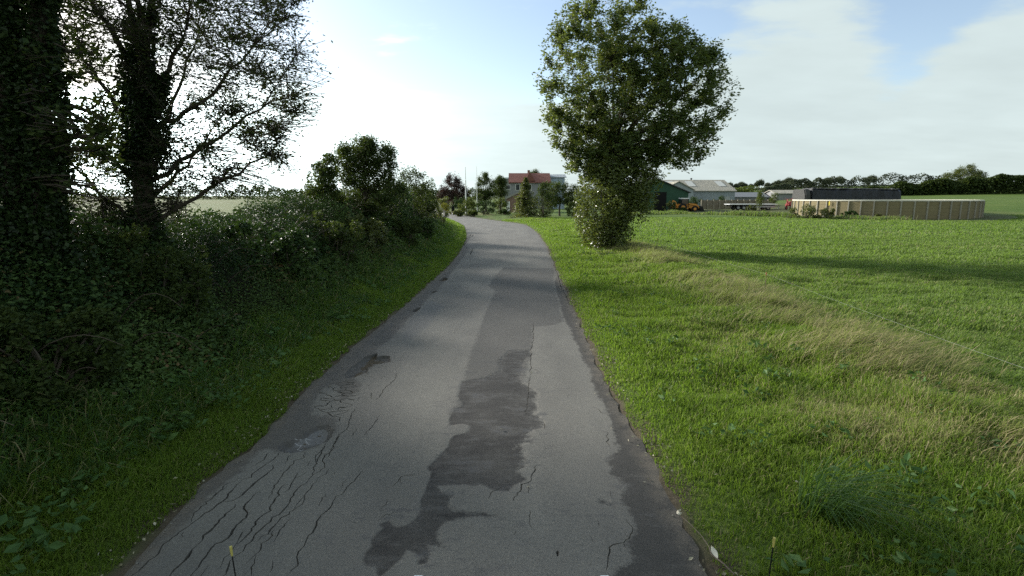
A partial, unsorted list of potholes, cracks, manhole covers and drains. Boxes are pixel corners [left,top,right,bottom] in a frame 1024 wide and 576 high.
crack [133,375,397,576]
pothole [344,353,391,378]
pothole [277,424,334,453]
crack [591,520,633,570]
